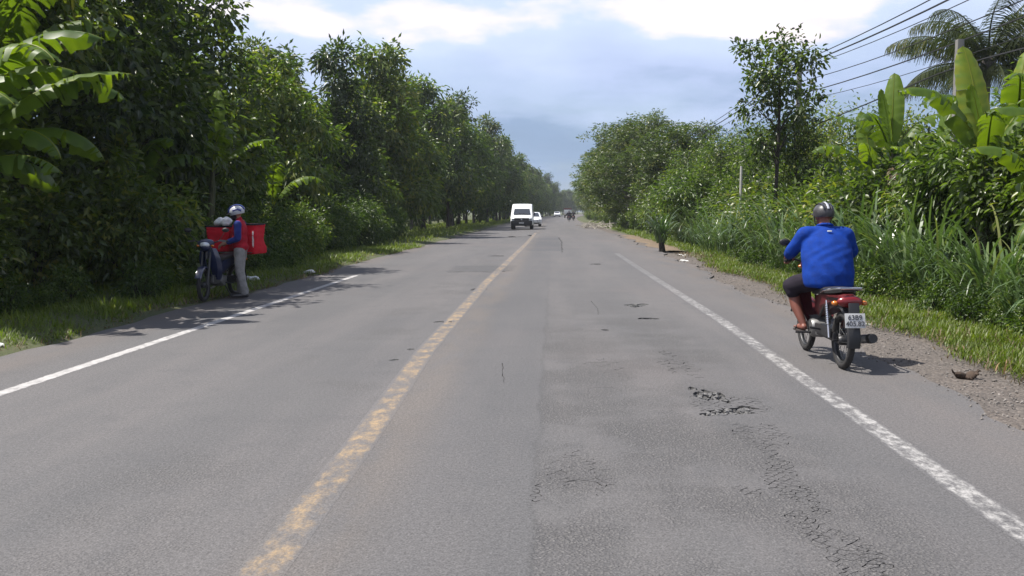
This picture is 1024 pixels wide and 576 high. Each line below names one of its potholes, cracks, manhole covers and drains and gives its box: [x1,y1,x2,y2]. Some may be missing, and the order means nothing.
crack [659,351,895,576]
crack [530,450,614,502]
pothole [688,387,759,416]
